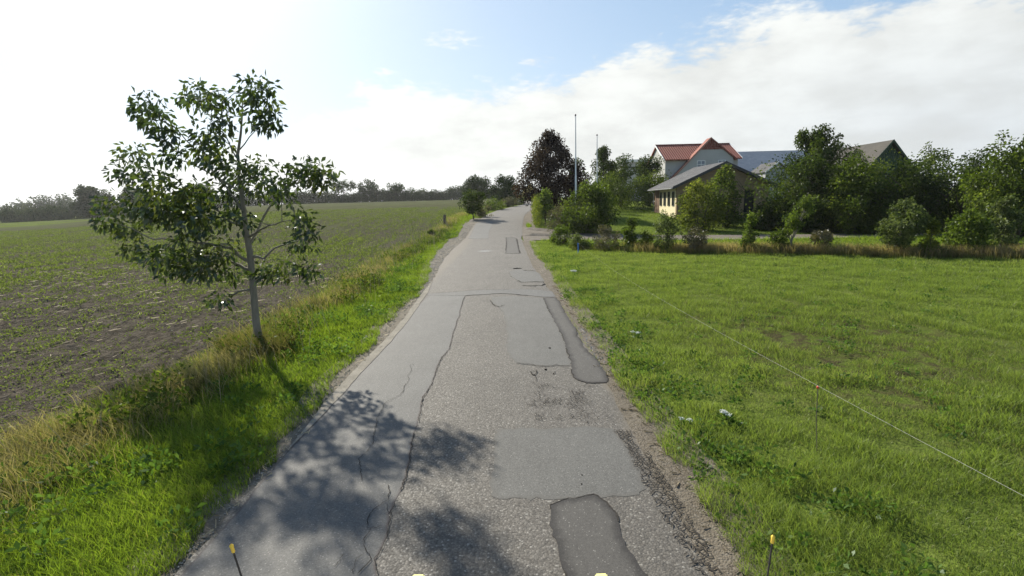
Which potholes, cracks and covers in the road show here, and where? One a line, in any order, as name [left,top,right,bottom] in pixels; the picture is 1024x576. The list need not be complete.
crack [516,362,721,576]
crack [335,485,395,574]
